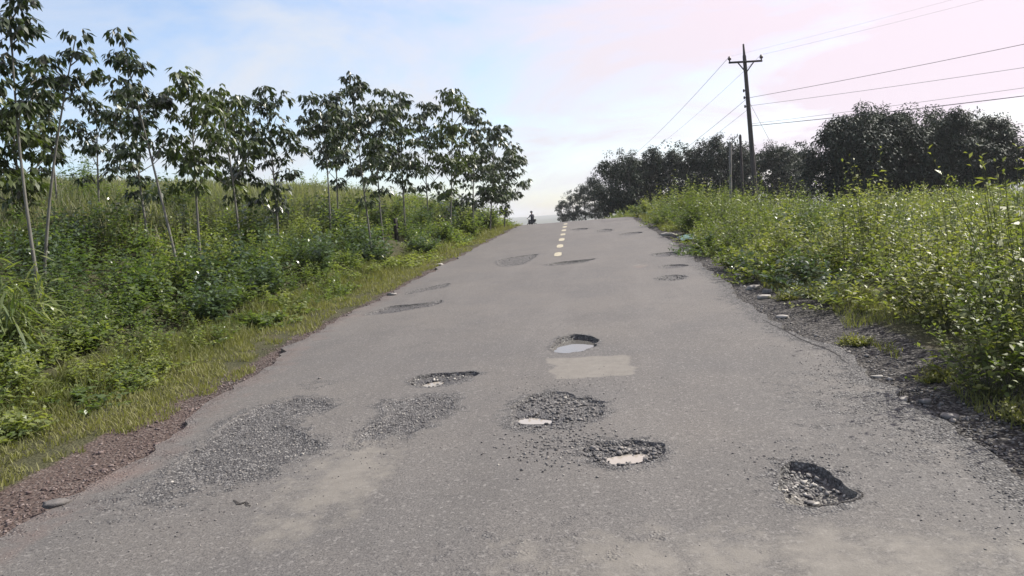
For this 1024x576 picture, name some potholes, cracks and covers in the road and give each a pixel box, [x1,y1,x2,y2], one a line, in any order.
pothole [510,391,606,429]
pothole [579,440,666,467]
pothole [549,334,599,353]
pothole [778,461,858,507]
pothole [407,371,480,387]
